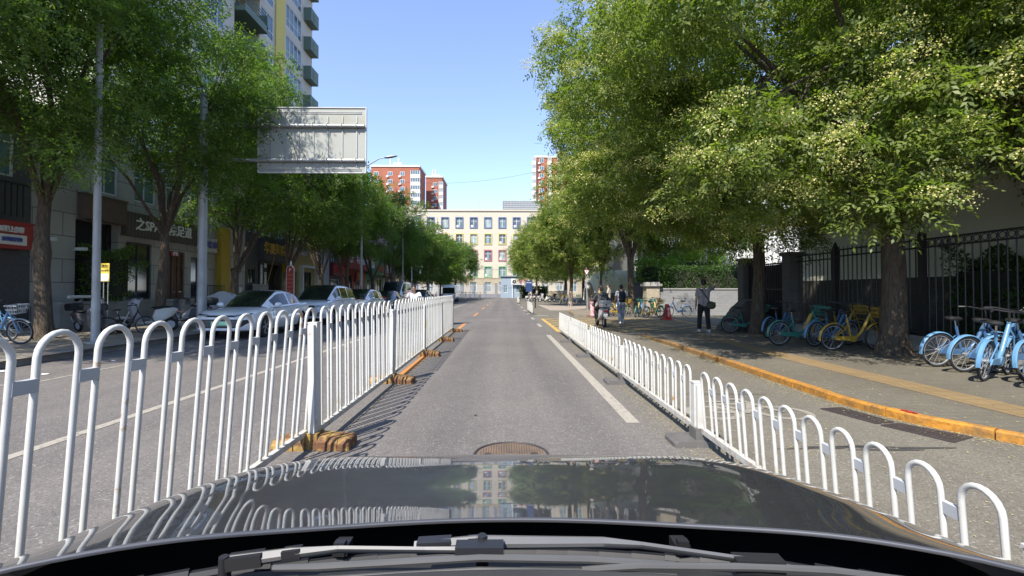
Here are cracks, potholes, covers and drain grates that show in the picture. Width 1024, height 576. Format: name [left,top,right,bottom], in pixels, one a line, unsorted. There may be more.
drain grate [820,407,894,424]
manhole cover [473,441,549,455]
drain grate [881,423,973,443]
